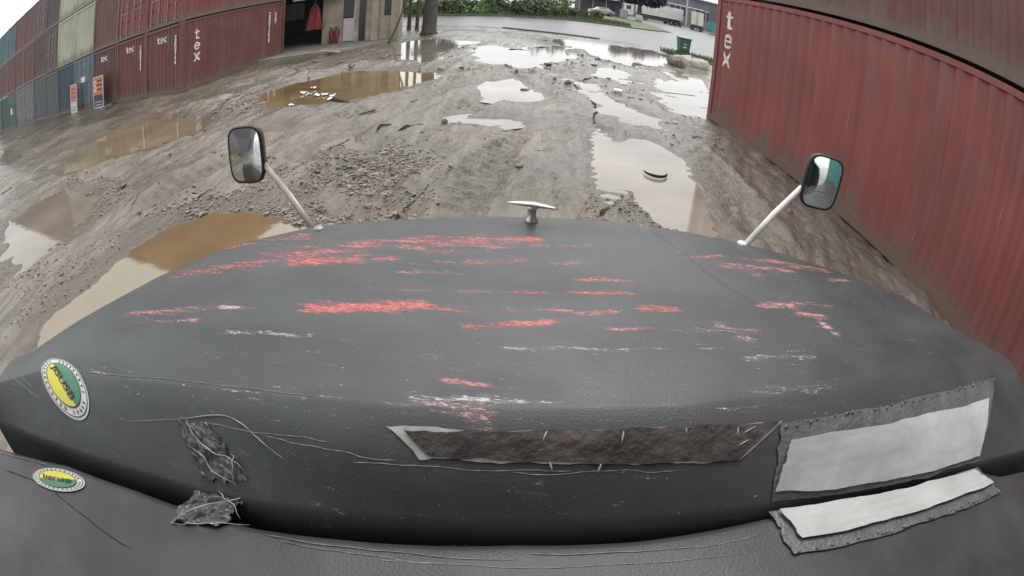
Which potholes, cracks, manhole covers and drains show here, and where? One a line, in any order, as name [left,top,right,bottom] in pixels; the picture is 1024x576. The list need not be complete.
pothole [443,114,526,131]
pothole [0,185,99,279]
pothole [477,78,545,104]
pothole [57,113,208,174]
pothole [256,69,445,109]
pothole [37,202,308,348]
pothole [589,129,738,238]
